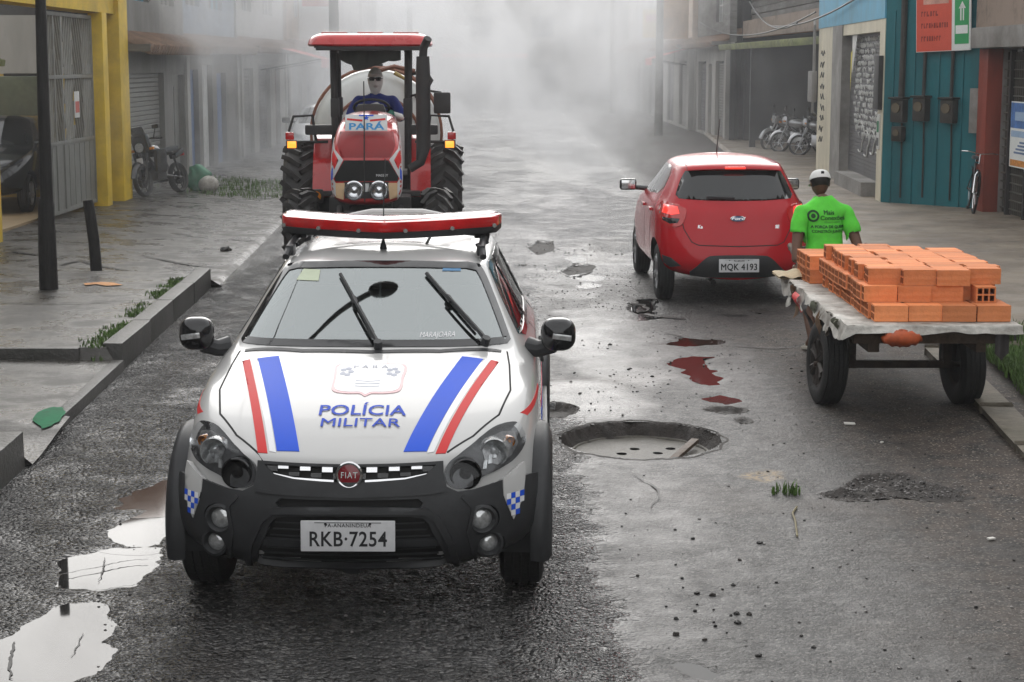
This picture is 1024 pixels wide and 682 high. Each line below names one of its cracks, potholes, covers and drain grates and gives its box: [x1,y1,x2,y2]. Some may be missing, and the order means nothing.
pothole [559,263,597,277]
pothole [526,240,555,255]
pothole [550,401,580,418]
manhole cover [553,420,729,461]
crack [631,472,660,507]
